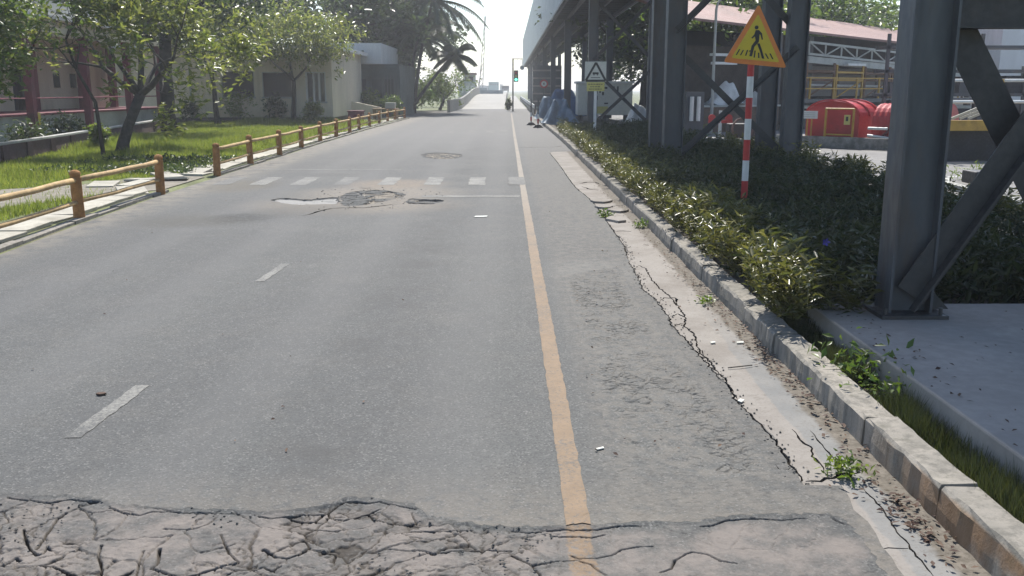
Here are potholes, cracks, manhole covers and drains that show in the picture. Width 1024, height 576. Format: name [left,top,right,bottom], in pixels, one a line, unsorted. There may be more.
pothole [339,190,406,206]
